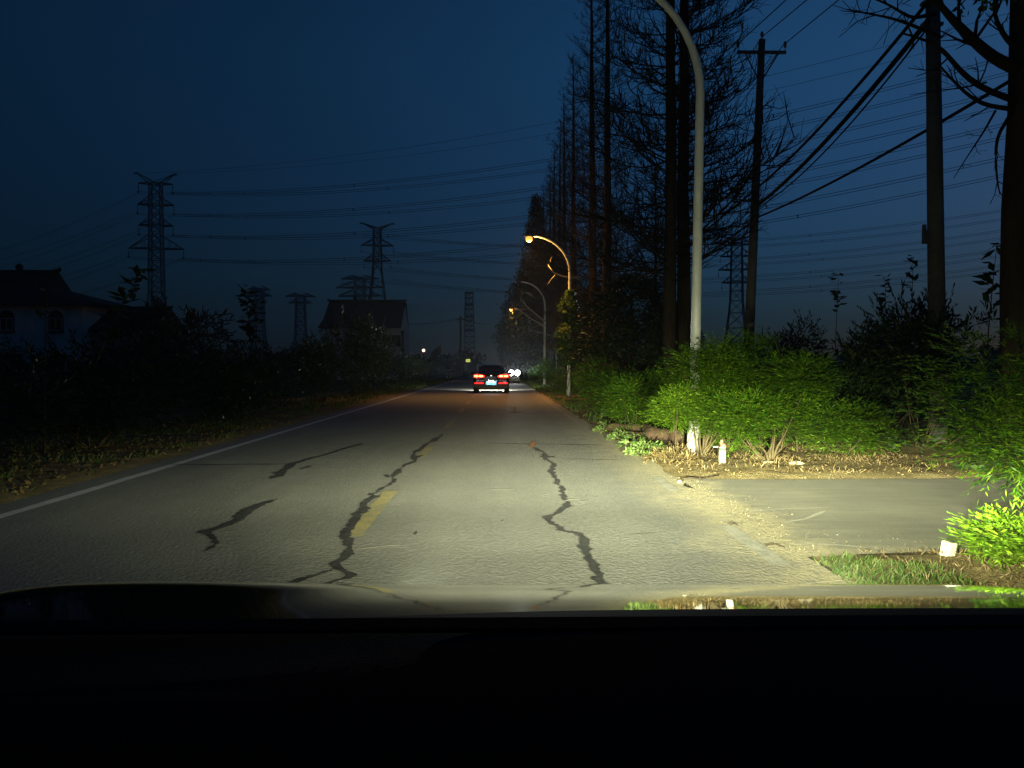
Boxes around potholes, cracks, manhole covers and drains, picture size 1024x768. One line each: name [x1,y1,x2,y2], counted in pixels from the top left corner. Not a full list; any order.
crack [270,444,362,479]
